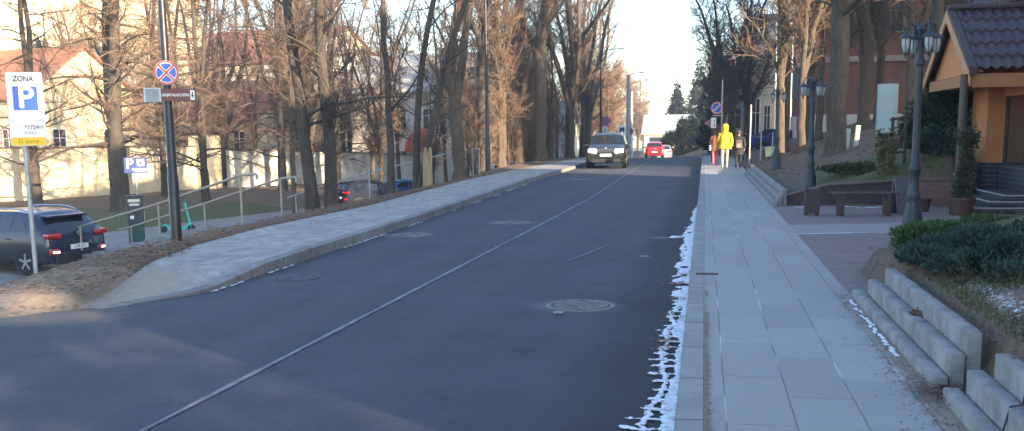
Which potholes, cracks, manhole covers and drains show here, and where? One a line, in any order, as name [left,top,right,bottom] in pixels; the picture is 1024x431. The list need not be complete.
manhole cover [273,274,321,282]
manhole cover [546,299,616,312]
